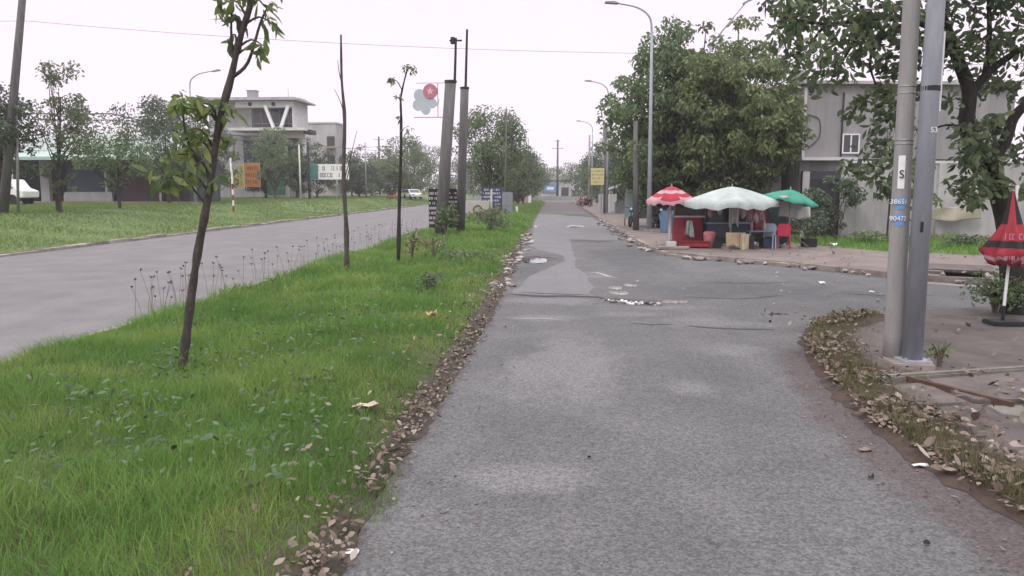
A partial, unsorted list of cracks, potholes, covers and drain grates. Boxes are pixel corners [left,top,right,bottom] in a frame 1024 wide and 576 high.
pothole [520,256,560,264]
crack [699,282,784,299]
